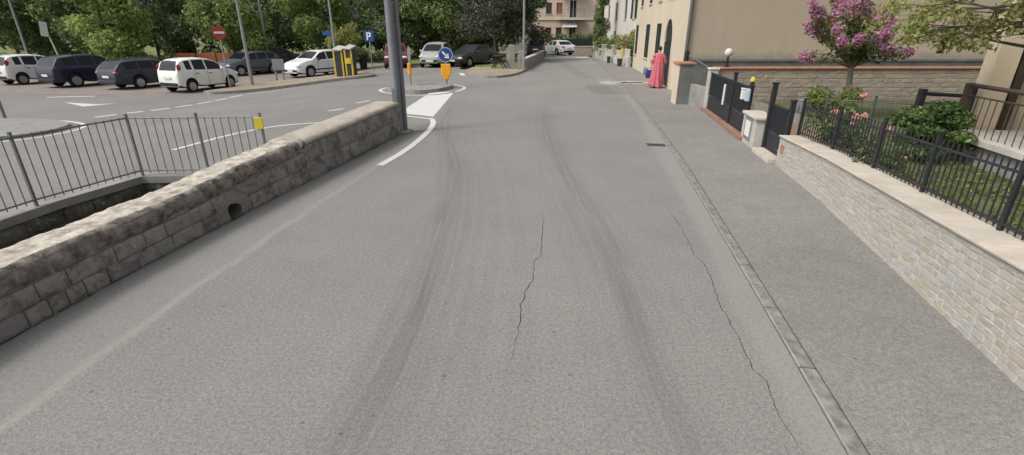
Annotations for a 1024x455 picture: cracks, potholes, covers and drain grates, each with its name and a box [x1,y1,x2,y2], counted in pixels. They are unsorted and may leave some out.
crack [509,213,544,363]
crack [662,201,804,454]
